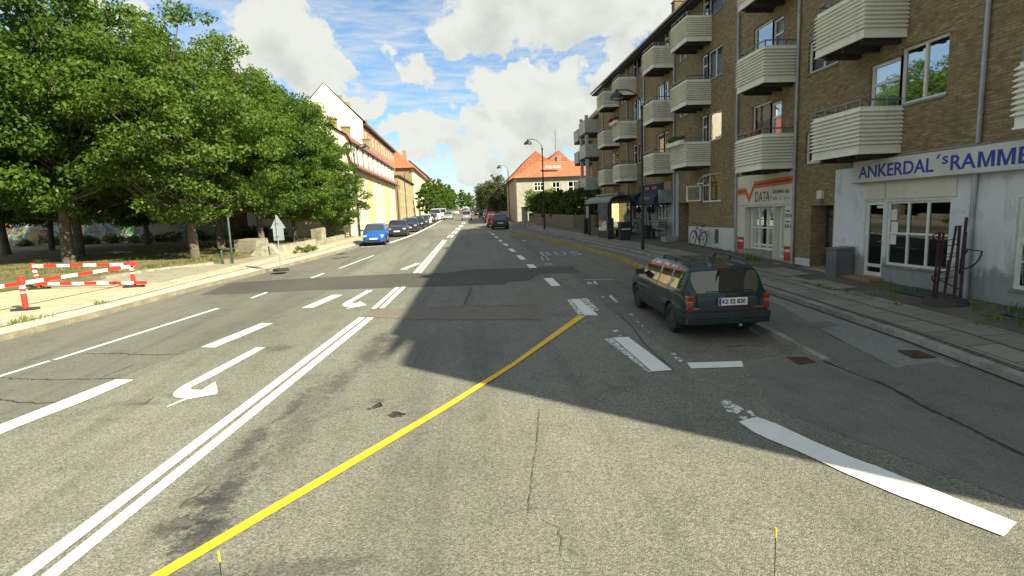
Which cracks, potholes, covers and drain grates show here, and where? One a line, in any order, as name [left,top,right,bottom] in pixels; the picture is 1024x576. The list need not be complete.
crack [0,353,181,380]
crack [523,412,581,557]
